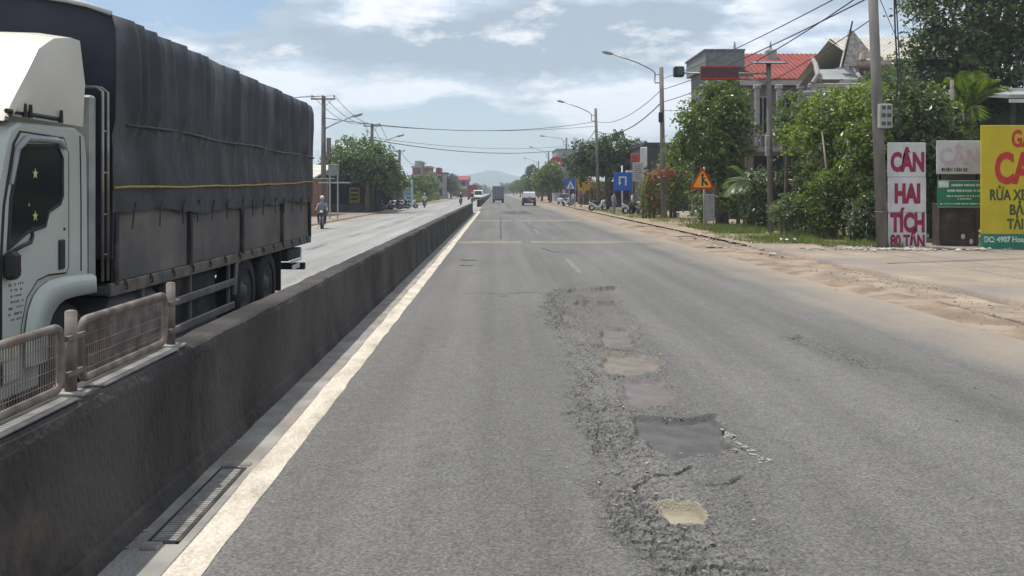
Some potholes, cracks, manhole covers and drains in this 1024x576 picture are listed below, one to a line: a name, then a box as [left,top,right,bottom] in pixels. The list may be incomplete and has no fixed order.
pothole [649,498,710,526]
pothole [616,378,685,409]
pothole [593,325,640,349]
pothole [597,351,665,377]
crack [464,283,898,576]
pothole [630,413,736,462]
drain grate [140,461,252,551]
